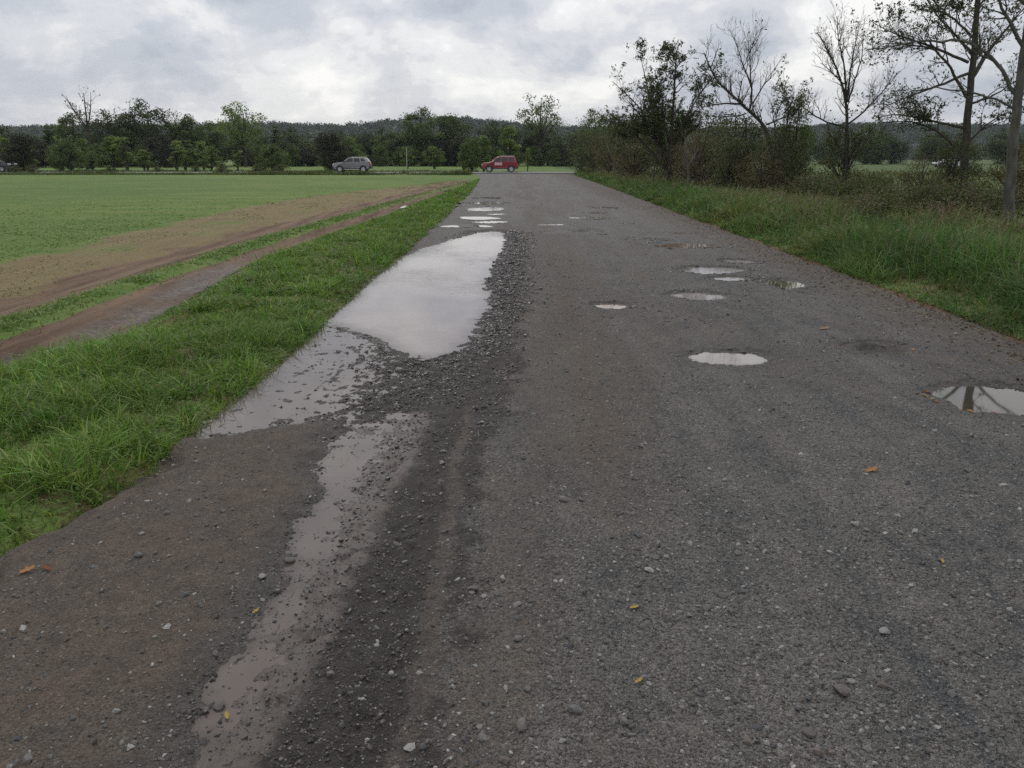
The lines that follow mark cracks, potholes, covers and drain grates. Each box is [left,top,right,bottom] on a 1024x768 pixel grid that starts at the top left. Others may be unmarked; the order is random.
pothole [668,346,795,368]
pothole [912,376,1024,418]
pothole [756,277,814,290]
pothole [582,299,638,310]
pothole [657,289,757,302]
pothole [669,264,754,275]
pothole [321,230,516,364]
